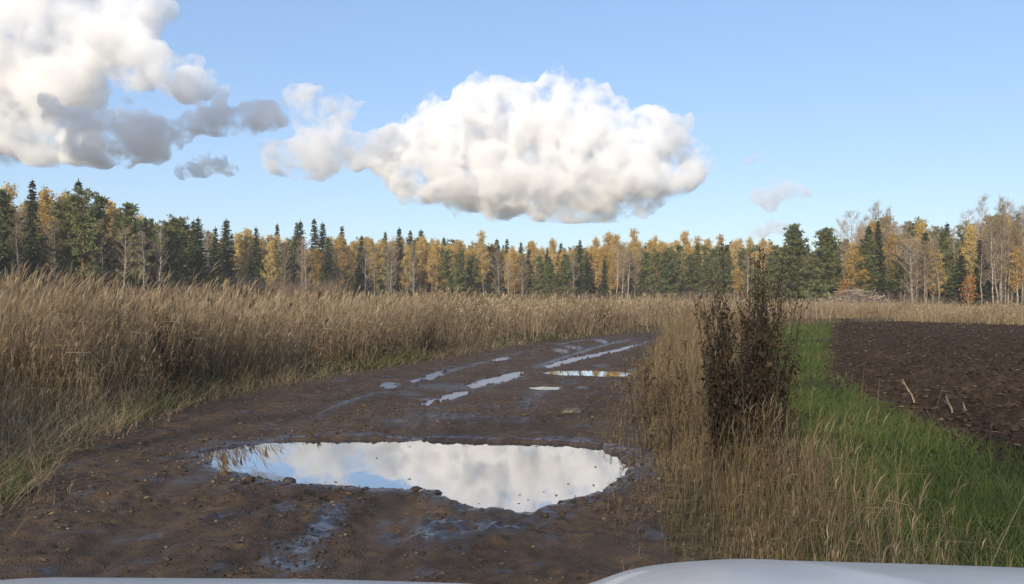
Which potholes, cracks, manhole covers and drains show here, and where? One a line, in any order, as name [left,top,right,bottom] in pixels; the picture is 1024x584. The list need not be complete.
pothole [191,433,646,515]
pothole [541,369,634,377]
